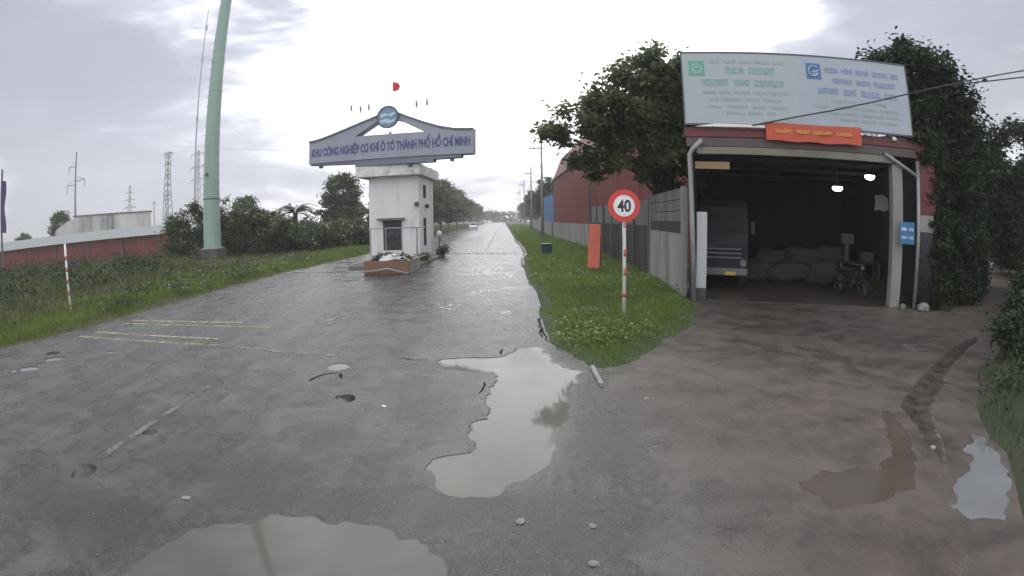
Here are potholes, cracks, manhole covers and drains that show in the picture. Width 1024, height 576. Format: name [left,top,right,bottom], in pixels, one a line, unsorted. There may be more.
crack [309,373,343,381]
pothole [71,464,97,479]
pothole [335,394,356,403]
